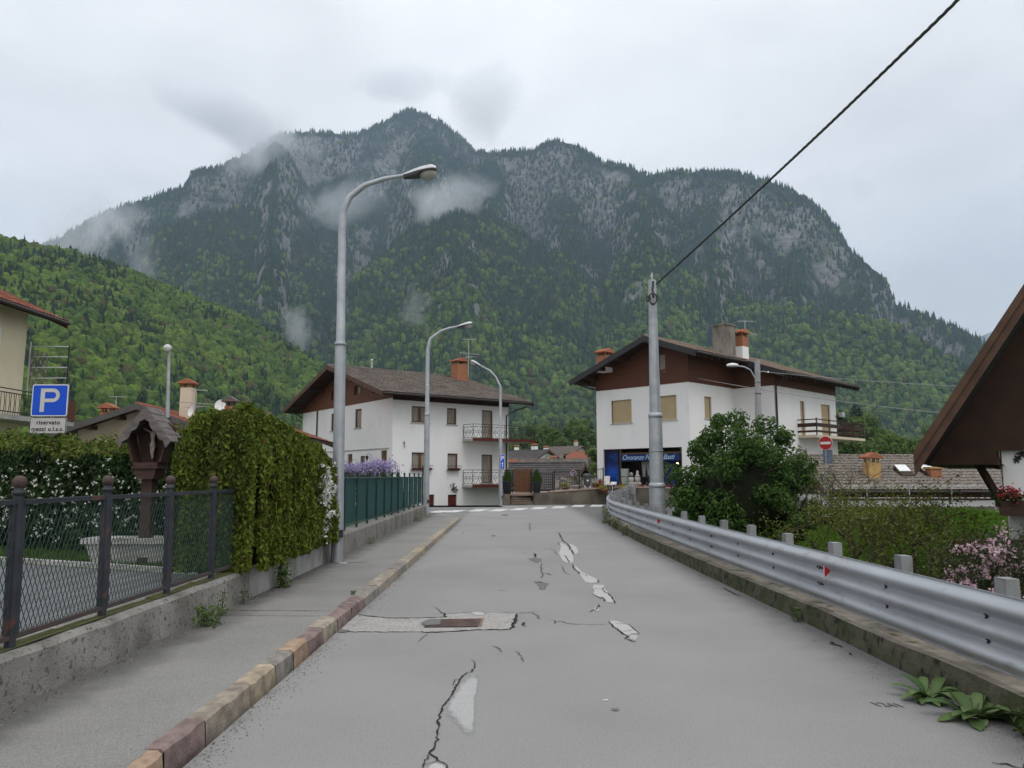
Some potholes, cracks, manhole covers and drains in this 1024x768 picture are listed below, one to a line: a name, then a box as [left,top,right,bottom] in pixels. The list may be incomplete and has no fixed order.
crack [499,533,640,642]
crack [422,661,476,768]
manhole cover [424,618,484,628]
